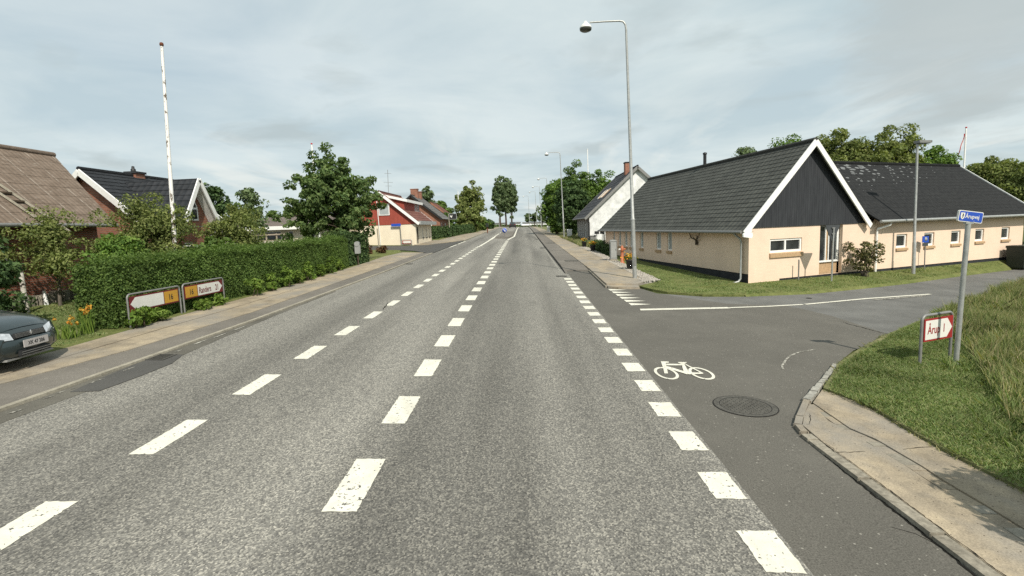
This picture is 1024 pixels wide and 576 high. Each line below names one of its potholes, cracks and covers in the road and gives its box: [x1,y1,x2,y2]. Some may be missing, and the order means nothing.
manhole cover [713,396,779,417]
